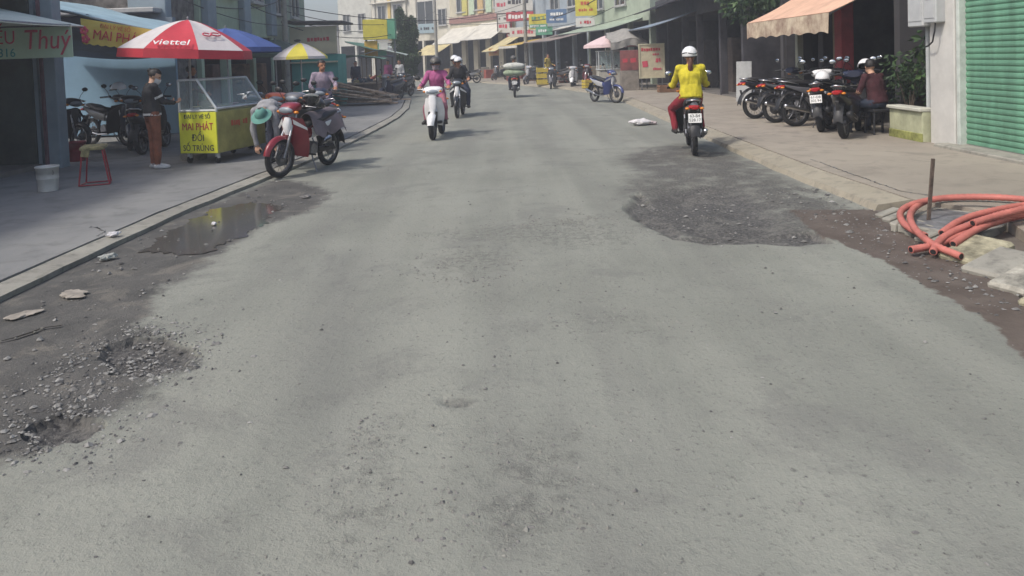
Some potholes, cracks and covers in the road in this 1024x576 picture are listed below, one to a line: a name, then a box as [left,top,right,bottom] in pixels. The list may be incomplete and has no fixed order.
pothole [20,413,108,448]
pothole [432,393,487,412]
pothole [93,334,203,378]
